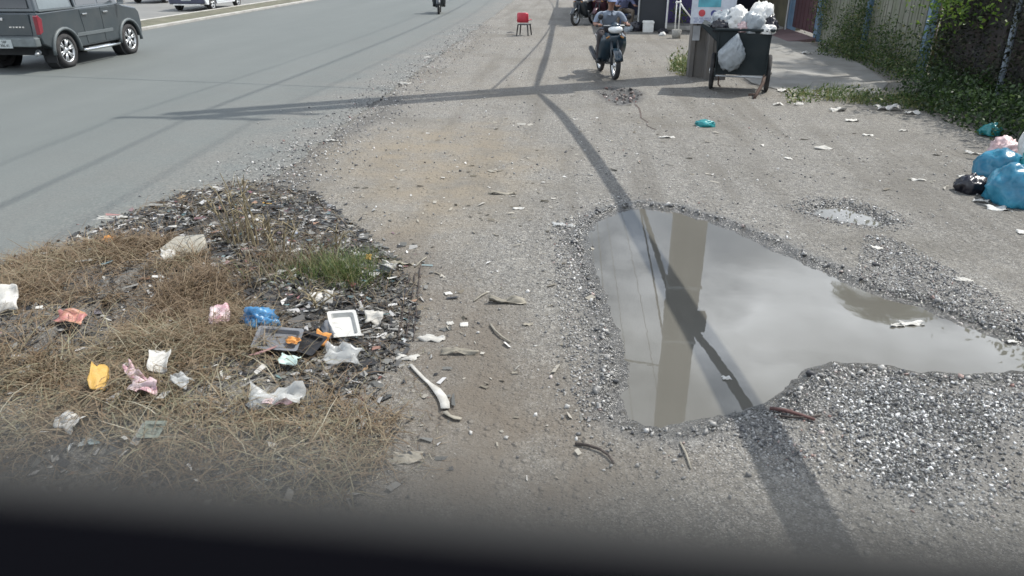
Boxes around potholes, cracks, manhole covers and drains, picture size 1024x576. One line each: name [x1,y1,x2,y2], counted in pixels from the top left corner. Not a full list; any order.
pothole [565,199,1024,445]
pothole [593,87,646,106]
